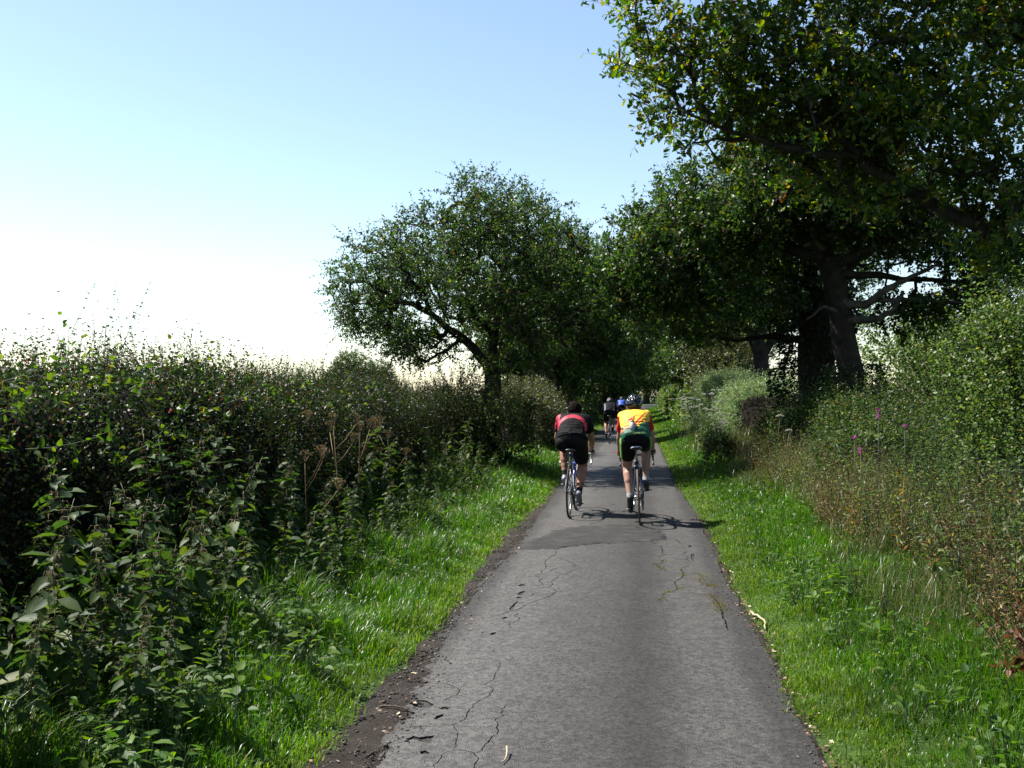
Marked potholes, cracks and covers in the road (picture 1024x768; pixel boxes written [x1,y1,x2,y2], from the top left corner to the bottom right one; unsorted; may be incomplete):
crack [658,537,729,630]
crack [403,663,506,768]
crack [496,551,576,627]
